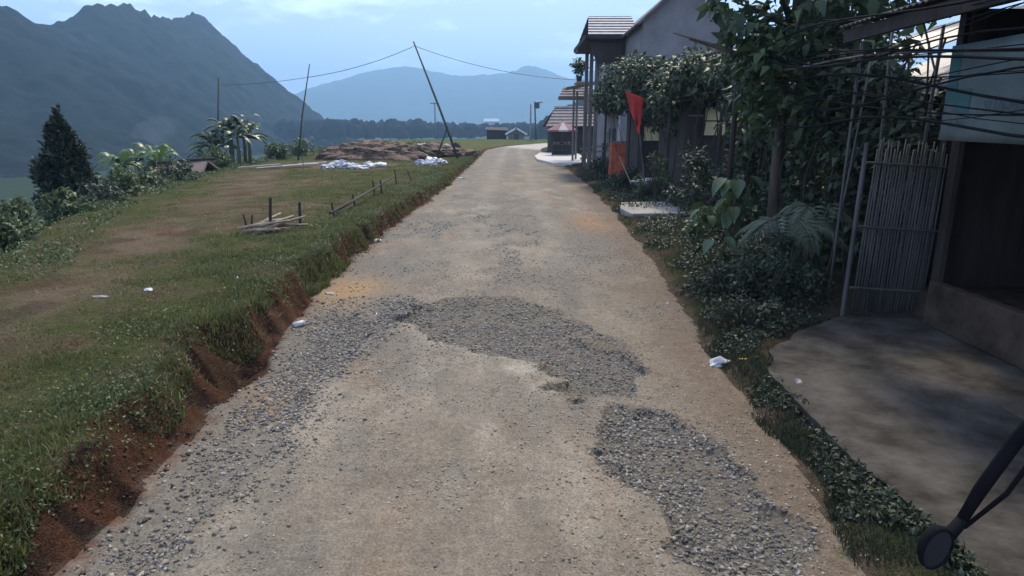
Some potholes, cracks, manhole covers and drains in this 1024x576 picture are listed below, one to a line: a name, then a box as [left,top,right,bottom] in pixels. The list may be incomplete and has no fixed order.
pothole [390,296,659,404]
pothole [586,402,825,576]
